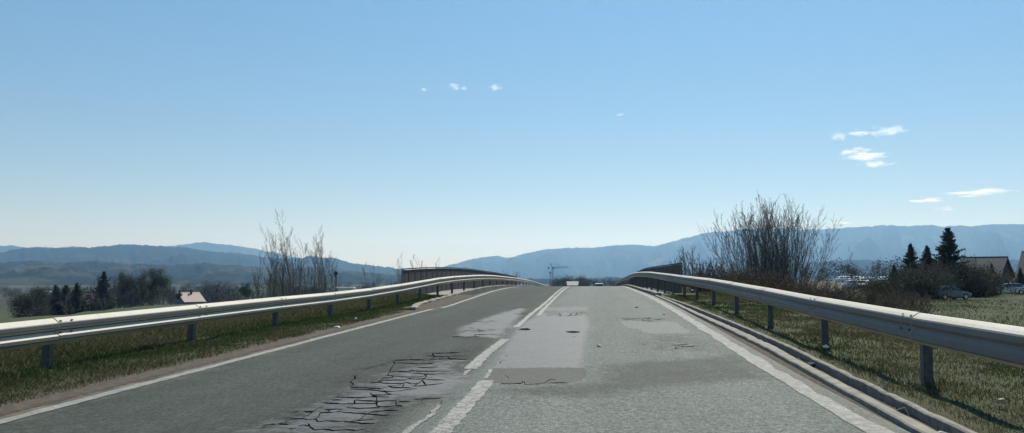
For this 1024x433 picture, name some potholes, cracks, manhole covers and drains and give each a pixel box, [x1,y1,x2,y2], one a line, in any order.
crack [500,355,565,385]
crack [259,321,498,431]
